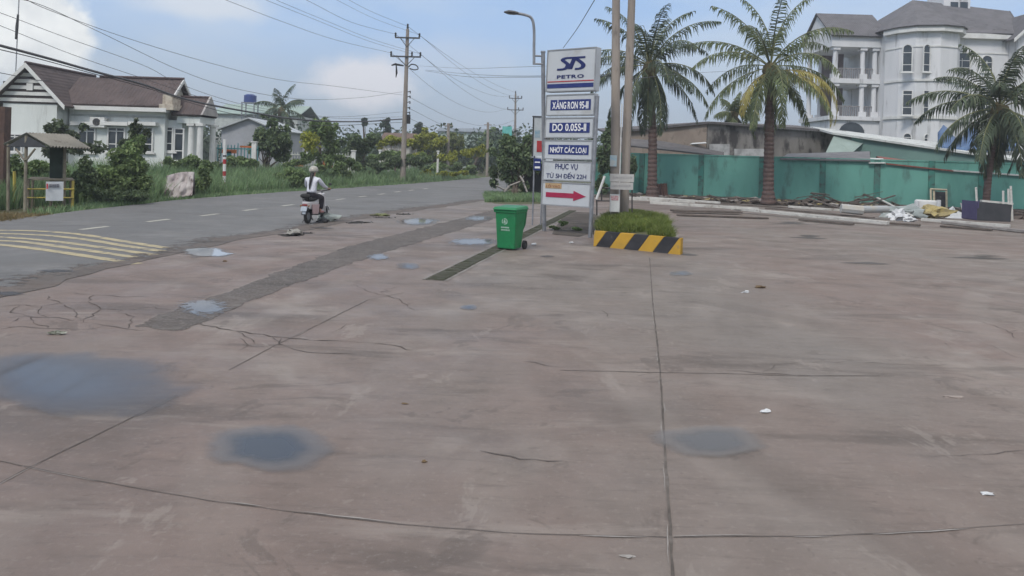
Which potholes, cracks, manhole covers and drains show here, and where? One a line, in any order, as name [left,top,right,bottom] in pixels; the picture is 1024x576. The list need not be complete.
crack [2,293,170,331]
crack [201,324,408,355]
